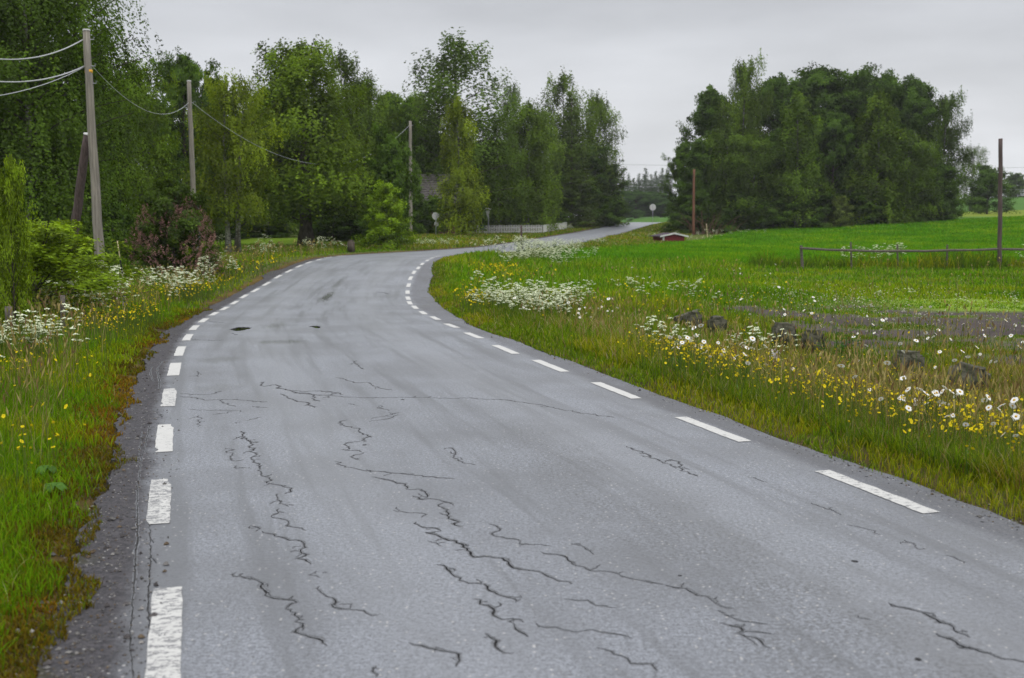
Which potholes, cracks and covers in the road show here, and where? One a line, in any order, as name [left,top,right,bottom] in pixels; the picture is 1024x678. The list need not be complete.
crack [190,361,771,671]
crack [889,603,1024,663]
